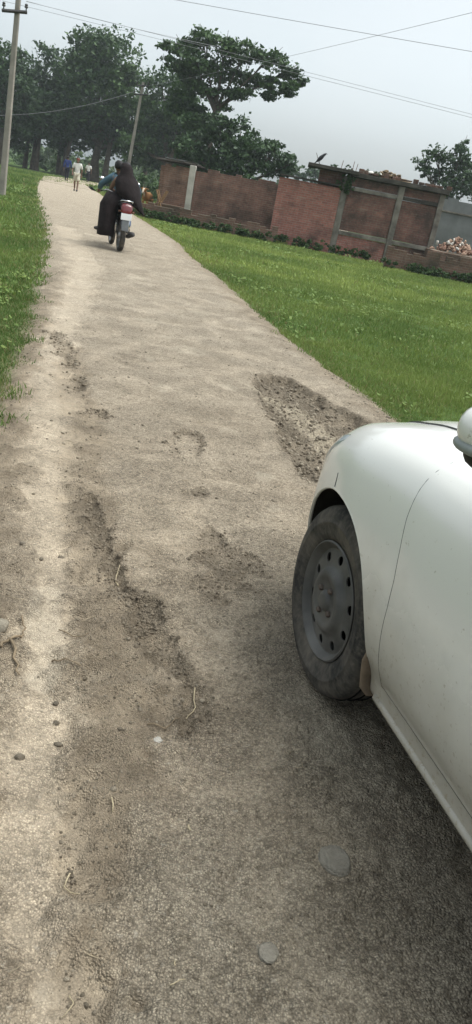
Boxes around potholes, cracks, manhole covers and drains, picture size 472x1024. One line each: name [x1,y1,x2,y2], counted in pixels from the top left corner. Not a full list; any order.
pothole [163,428,209,460]
pothole [189,525,269,607]
pothole [188,485,211,499]
pothole [248,373,373,484]
